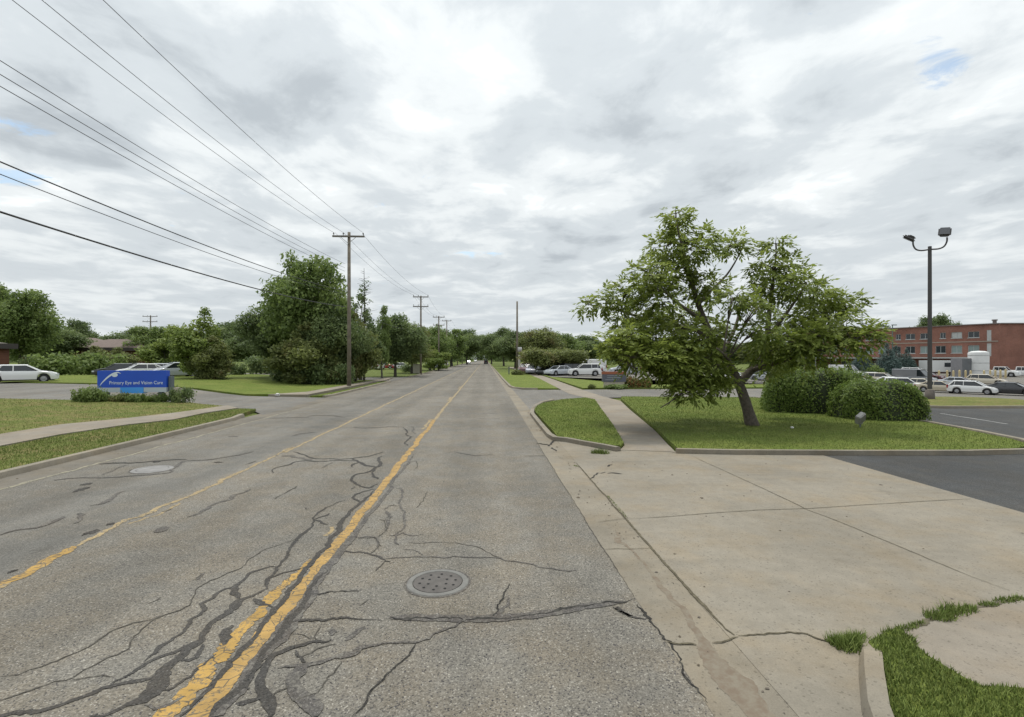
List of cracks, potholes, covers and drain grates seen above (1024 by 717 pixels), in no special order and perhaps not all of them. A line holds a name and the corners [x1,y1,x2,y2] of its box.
crack [366,519,391,570]
crack [271,626,416,716]
crack [390,583,635,620]
manhole cover [404,569,471,598]
manhole cover [128,465,176,474]
crack [1,539,295,700]
